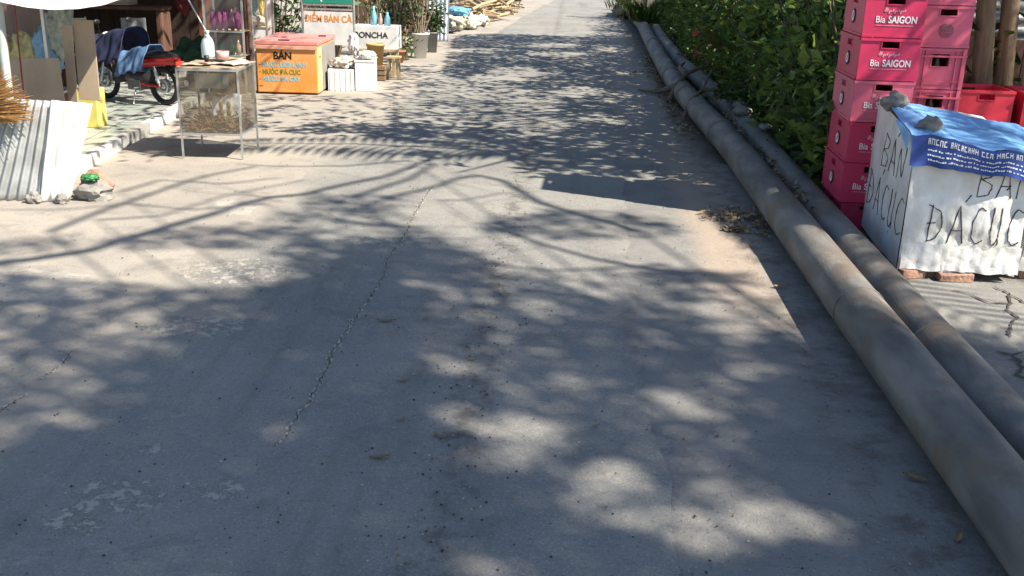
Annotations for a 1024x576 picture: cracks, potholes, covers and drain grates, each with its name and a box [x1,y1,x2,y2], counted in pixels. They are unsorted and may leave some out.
crack [0,349,74,411]
crack [274,186,432,449]
crack [954,286,1024,378]
